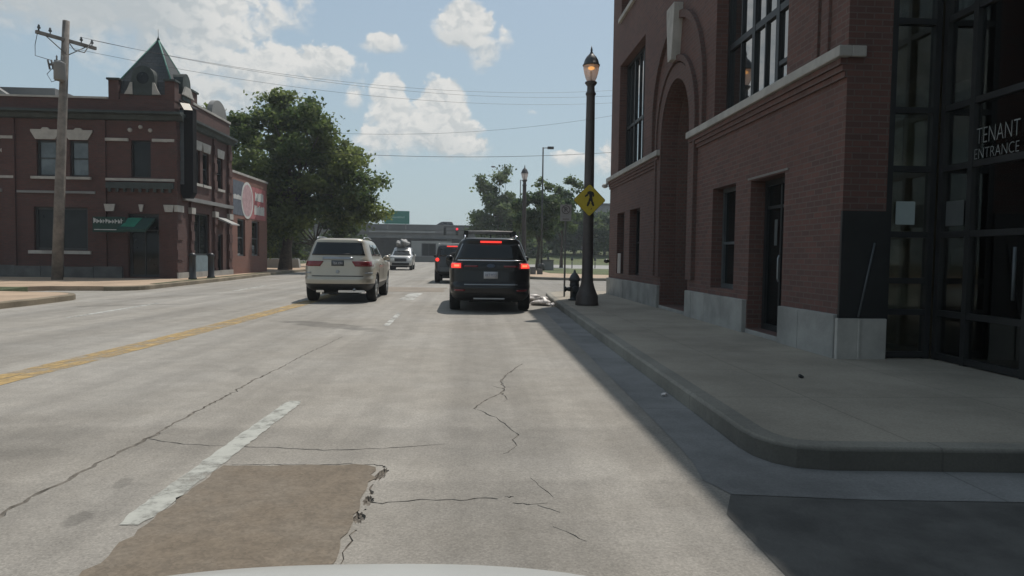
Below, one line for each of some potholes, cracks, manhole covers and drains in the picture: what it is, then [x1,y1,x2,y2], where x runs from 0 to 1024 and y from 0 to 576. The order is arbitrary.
crack [473,364,522,454]
crack [370,478,587,542]
crack [0,338,440,518]
